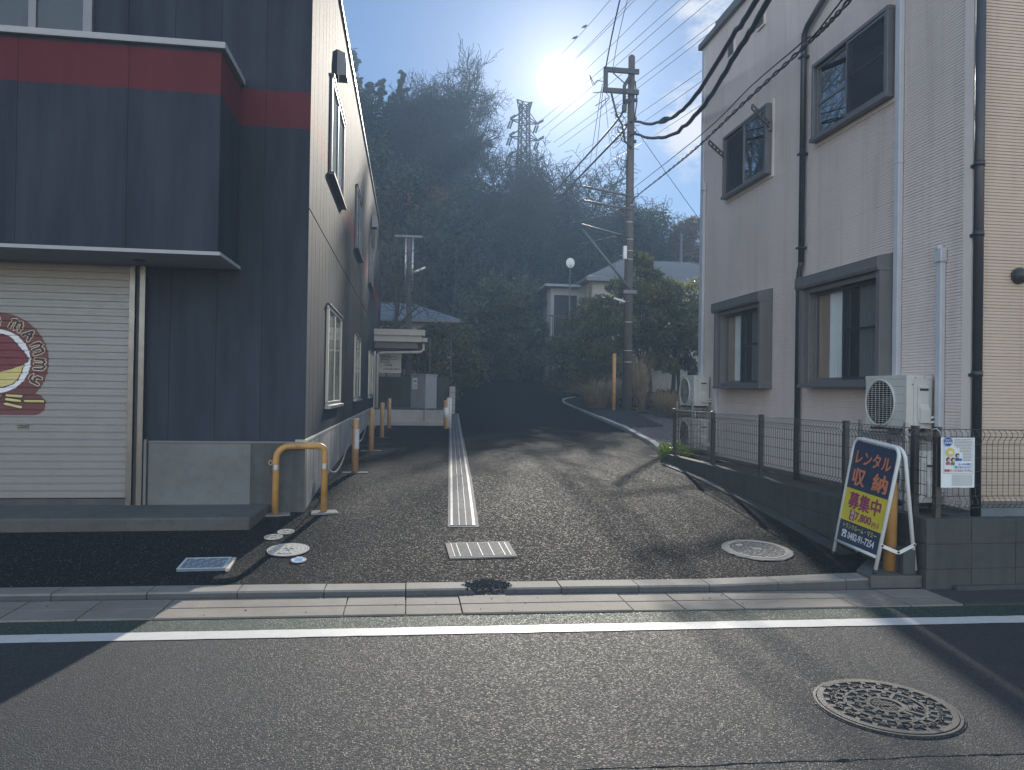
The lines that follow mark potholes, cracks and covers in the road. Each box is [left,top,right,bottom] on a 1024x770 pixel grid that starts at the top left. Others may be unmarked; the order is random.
manhole cover [721,539,794,561]
manhole cover [266,543,310,557]
drain grate [445,541,517,560]
manhole cover [811,679,967,739]
